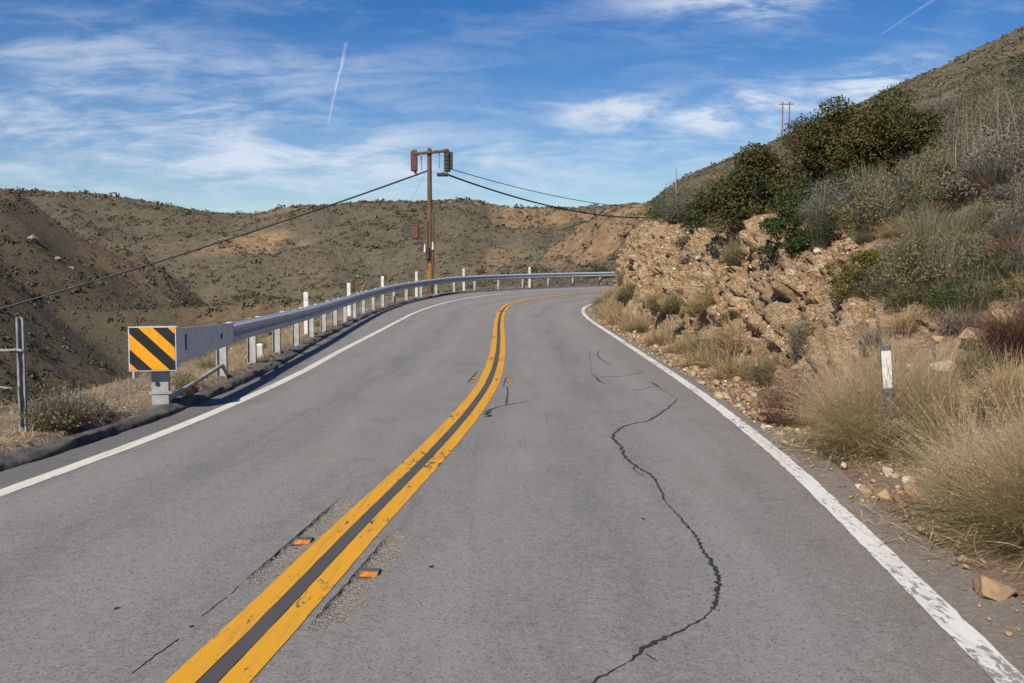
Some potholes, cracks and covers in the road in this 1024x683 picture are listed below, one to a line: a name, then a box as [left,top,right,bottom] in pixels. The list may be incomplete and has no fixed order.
crack [132,638,179,673]
crack [589,350,667,393]
